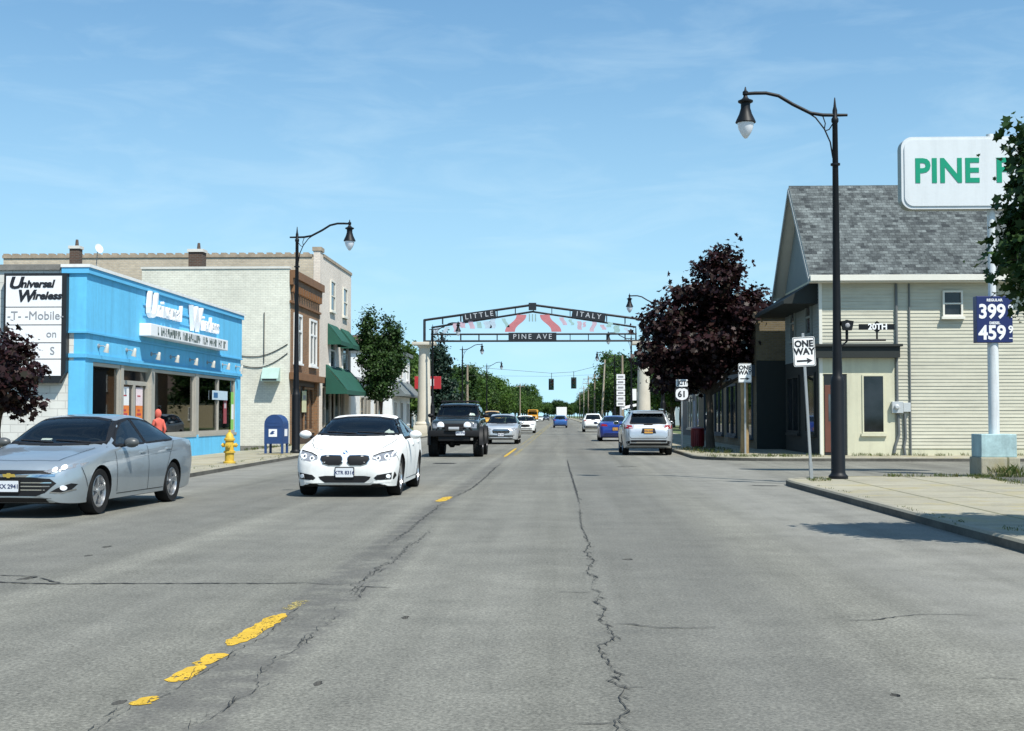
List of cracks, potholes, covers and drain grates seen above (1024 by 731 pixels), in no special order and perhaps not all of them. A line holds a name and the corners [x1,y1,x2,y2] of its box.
crack [0,575,348,584]
crack [556,461,715,731]
